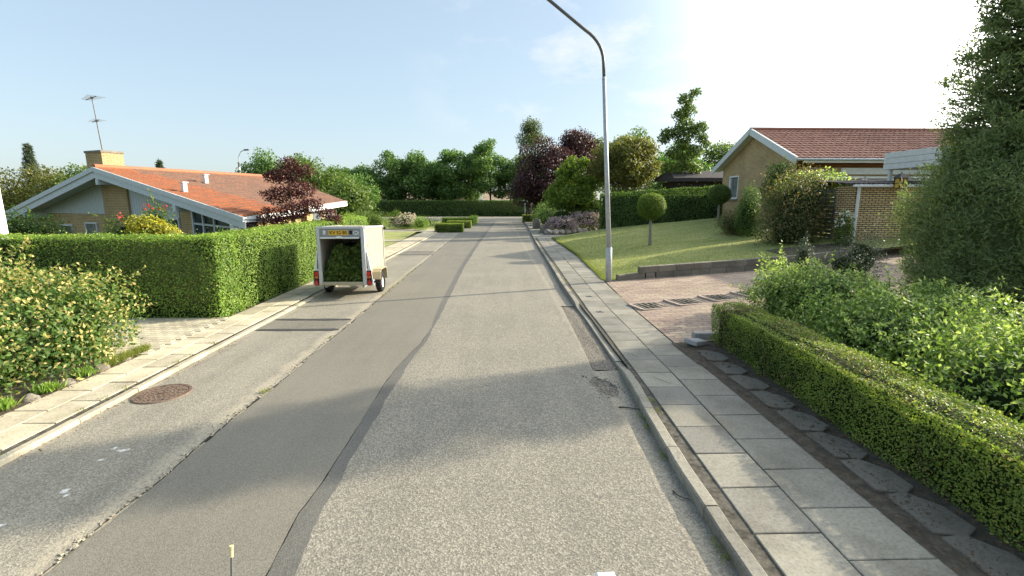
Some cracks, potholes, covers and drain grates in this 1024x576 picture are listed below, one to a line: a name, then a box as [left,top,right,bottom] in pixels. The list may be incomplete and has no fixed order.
drain grate [628,301,672,311]
drain grate [697,293,741,302]
drain grate [663,297,707,306]
manhole cover [130,384,193,404]
